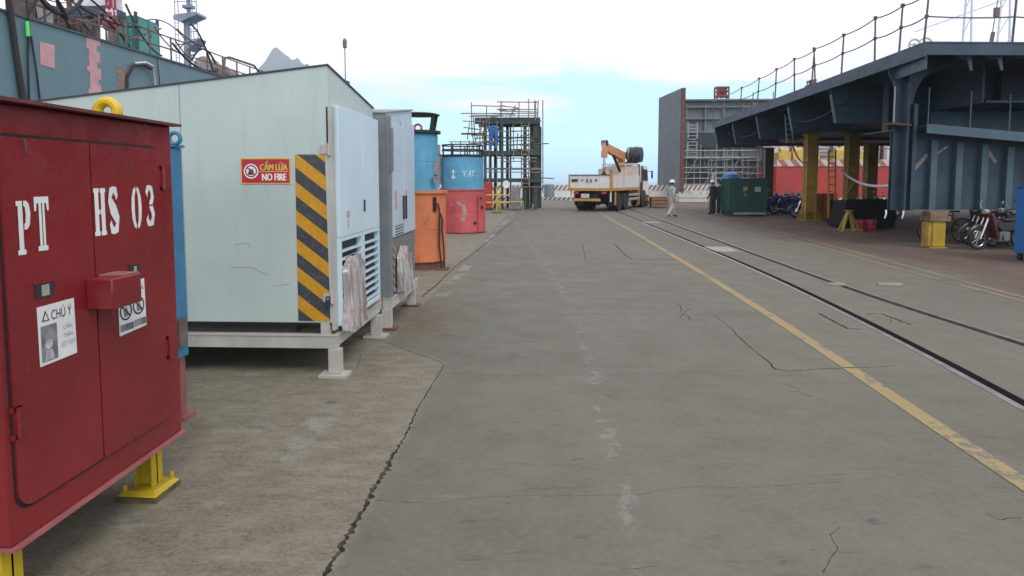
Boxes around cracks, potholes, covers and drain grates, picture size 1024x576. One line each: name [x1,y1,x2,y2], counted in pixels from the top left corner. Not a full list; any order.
crack [714,315,885,396]
crack [322,342,845,576]
crack [805,313,911,331]
